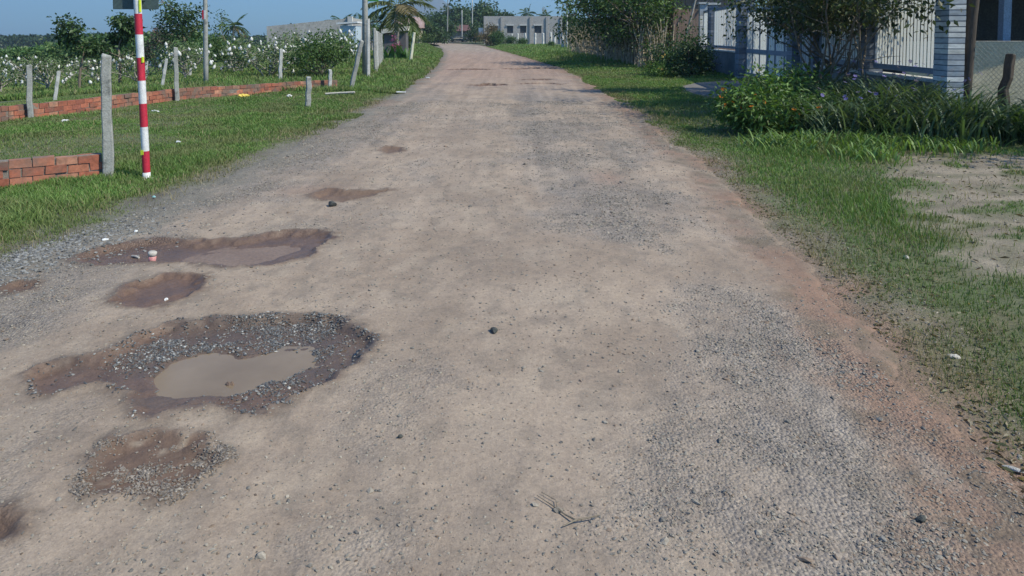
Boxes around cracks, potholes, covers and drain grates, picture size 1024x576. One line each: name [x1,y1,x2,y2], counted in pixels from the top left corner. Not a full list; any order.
pothole [378,145,406,153]
pothole [76,427,227,499]
pothole [108,272,207,308]
pothole [309,188,389,202]
pothole [0,279,42,293]
pothole [23,312,381,418]
pothole [71,228,337,267]
pothole [0,505,28,541]
